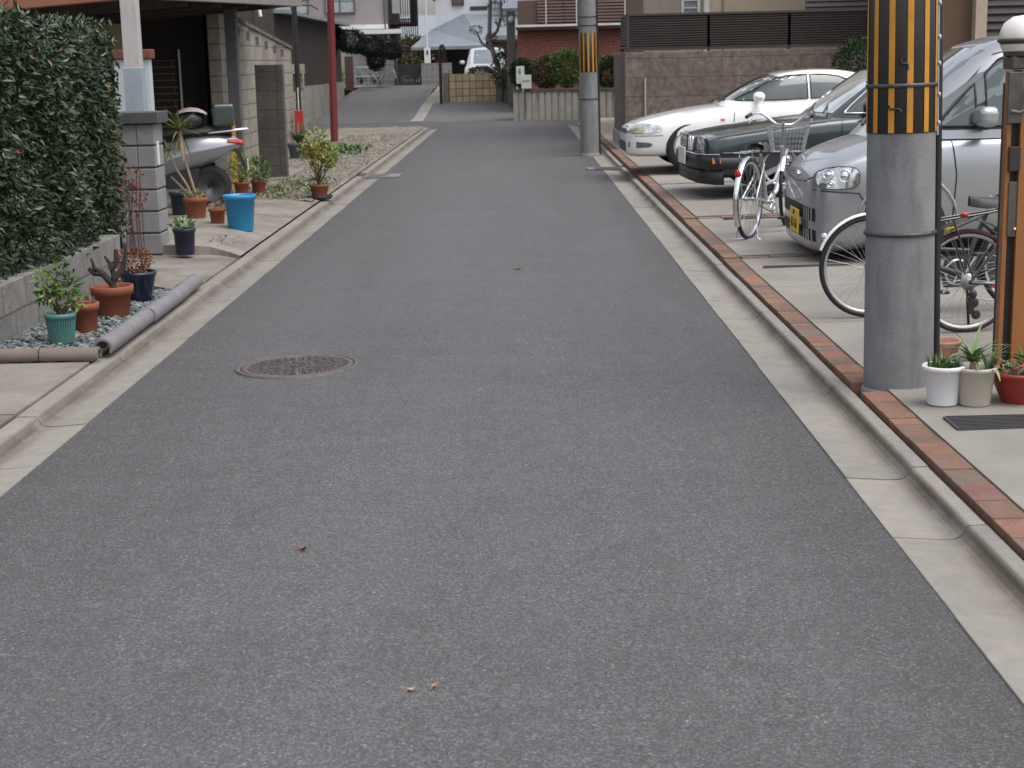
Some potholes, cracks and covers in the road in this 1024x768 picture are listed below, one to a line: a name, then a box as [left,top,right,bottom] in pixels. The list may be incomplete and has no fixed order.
manhole cover [235,353,359,379]
